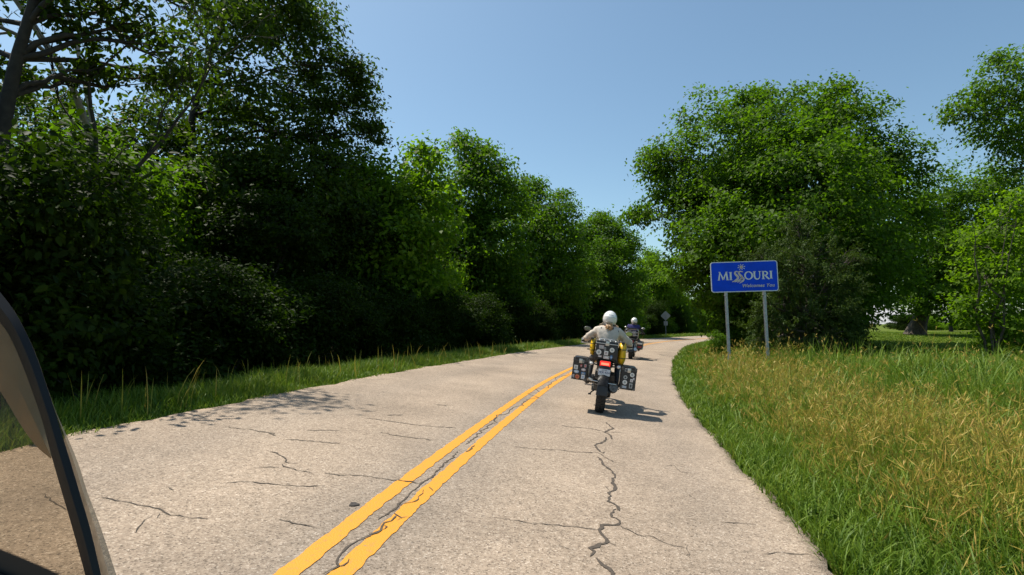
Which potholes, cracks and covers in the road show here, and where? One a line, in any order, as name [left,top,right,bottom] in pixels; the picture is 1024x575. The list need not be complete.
crack [491,422,690,575]
crack [103,487,208,531]
